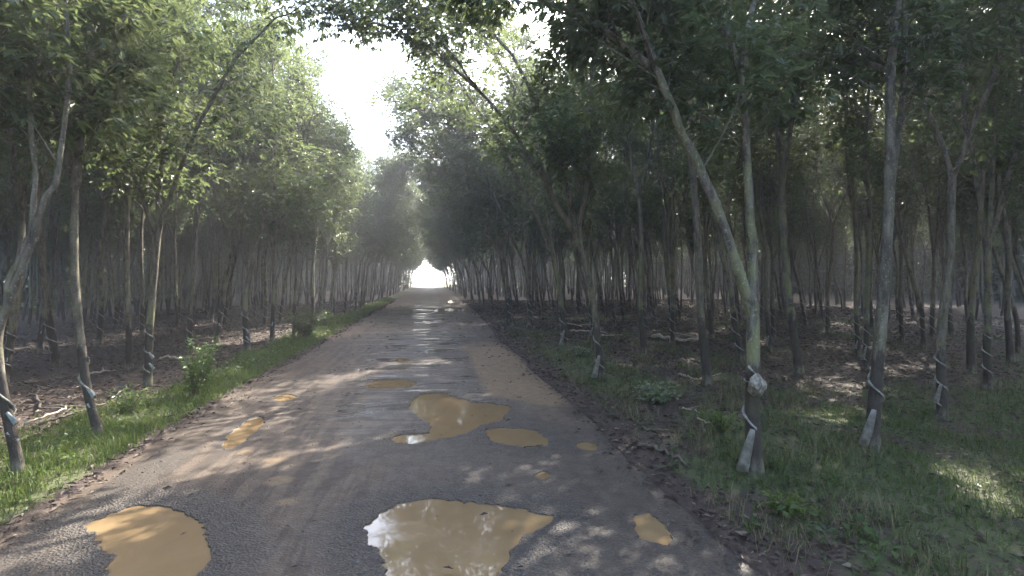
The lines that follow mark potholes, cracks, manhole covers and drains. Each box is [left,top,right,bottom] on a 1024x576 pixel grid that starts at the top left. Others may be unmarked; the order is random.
pothole [575,441,598,451]
pothole [271,394,297,402]
pothole [221,416,266,449]
pothole [391,393,512,444]
pothole [363,497,554,576]
pothole [633,511,673,545]
pothole [83,504,212,576]
pothole [365,379,418,389]
pothole [485,427,549,448]
pothole [534,470,551,479]
